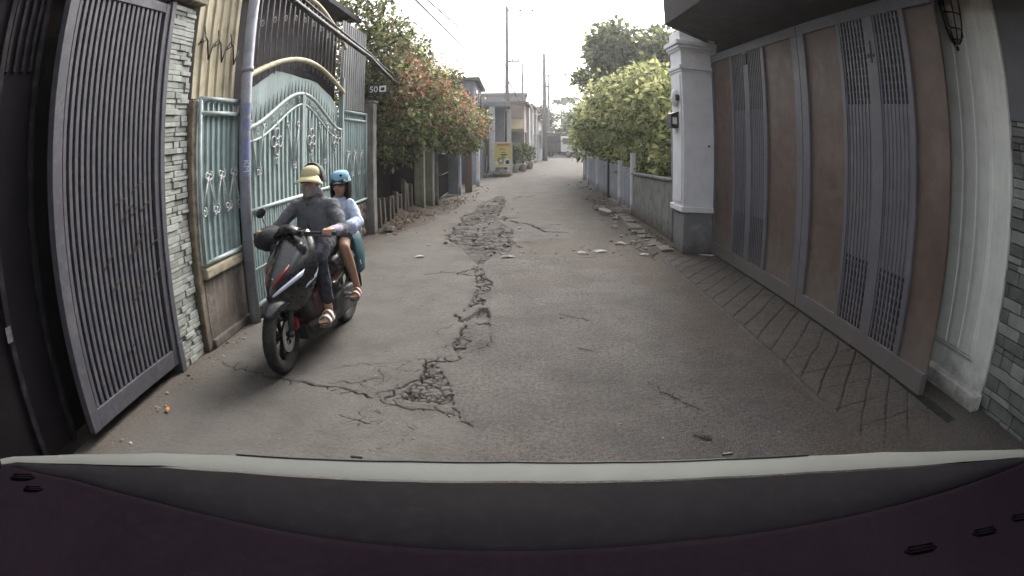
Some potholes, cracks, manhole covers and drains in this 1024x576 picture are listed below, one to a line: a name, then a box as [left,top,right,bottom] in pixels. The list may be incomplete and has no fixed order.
crack [644,380,703,411]
pothole [441,196,519,266]
crack [220,266,496,451]
crack [494,216,565,248]
